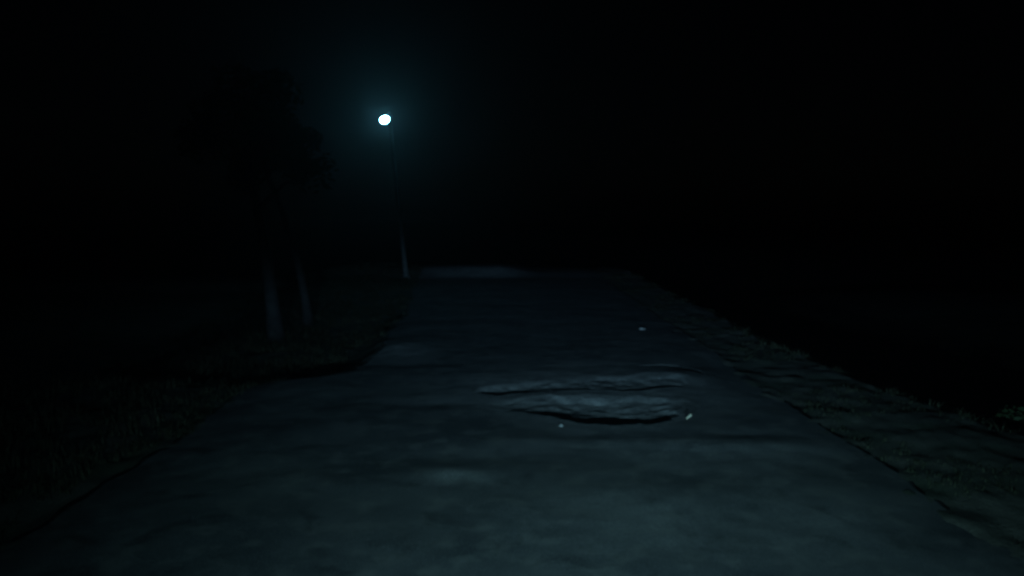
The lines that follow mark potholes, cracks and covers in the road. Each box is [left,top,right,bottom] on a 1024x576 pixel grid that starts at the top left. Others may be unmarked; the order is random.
pothole [465,392,696,428]
pothole [471,371,697,396]
